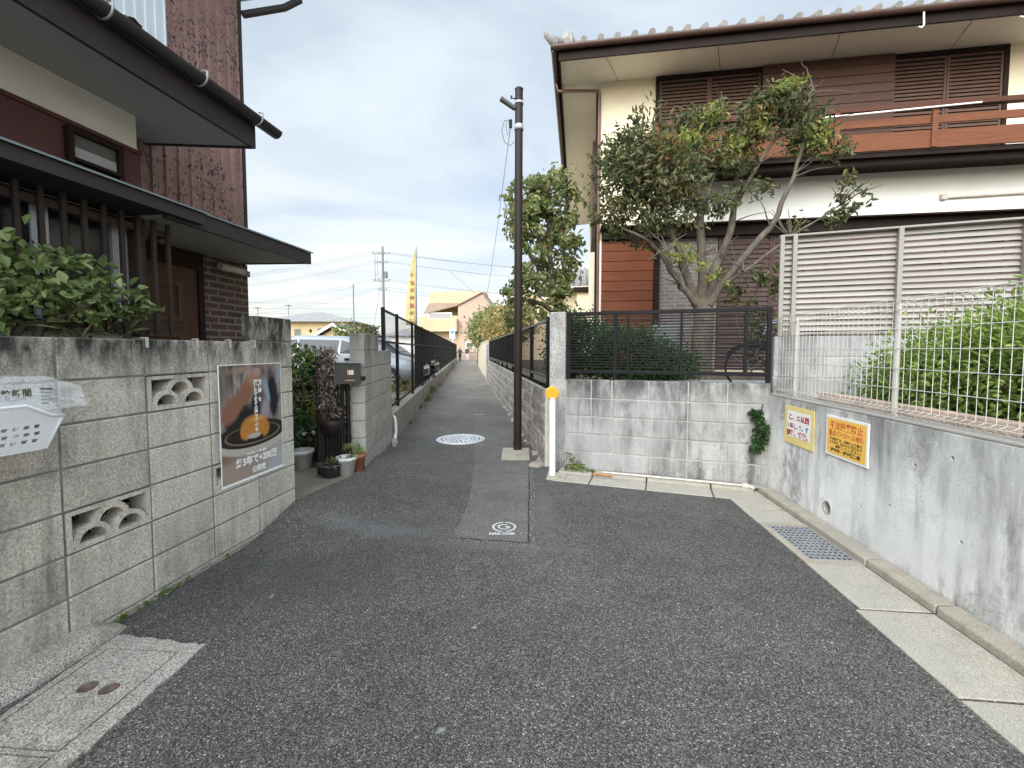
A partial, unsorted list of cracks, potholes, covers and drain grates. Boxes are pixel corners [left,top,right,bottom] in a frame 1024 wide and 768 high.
drain grate [758,522,864,566]
manhole cover [436,434,485,445]
